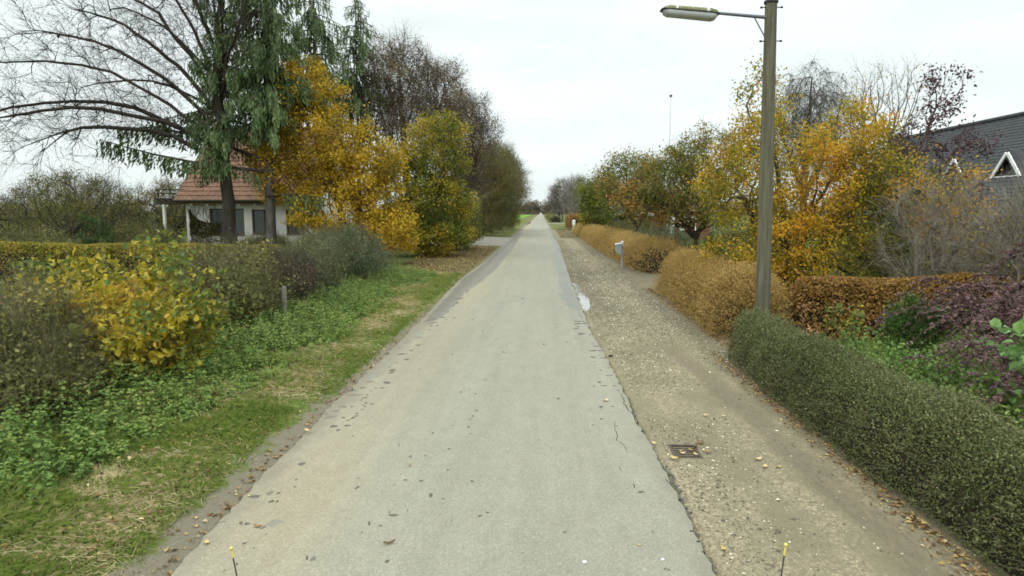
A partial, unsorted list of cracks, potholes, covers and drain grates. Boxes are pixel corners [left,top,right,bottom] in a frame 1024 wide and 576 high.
drain grate [668,444,703,459]
crack [597,350,639,488]
